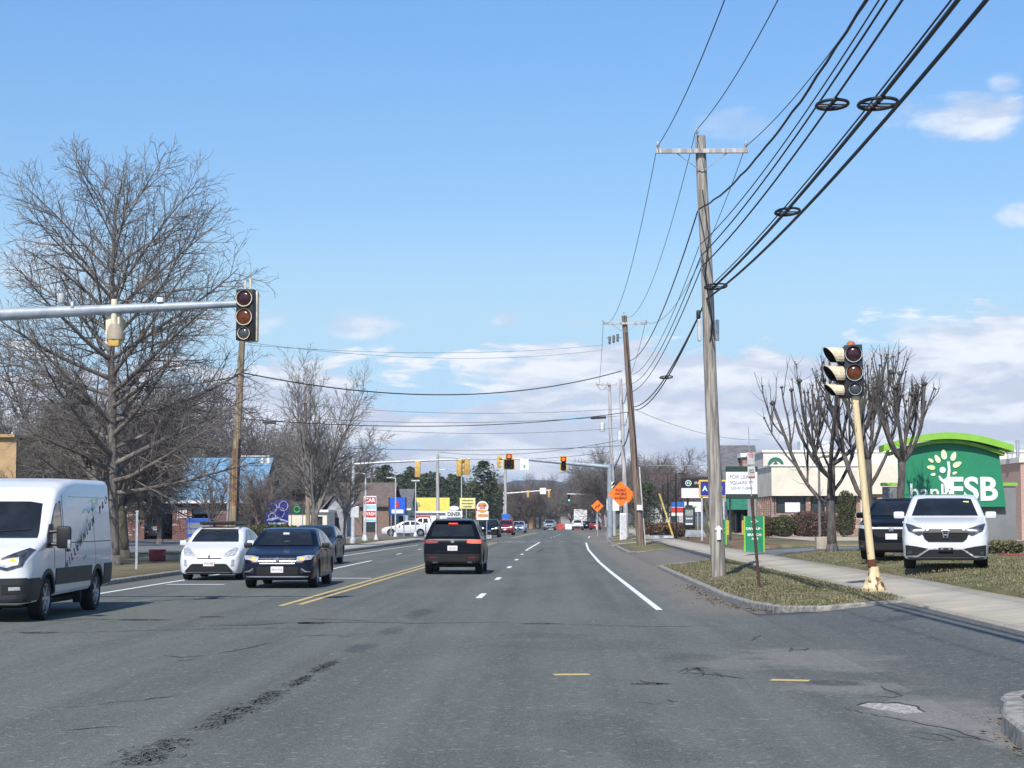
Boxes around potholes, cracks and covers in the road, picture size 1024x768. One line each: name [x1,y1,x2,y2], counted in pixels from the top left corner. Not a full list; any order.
crack [608,667,739,704]
crack [843,685,995,743]
